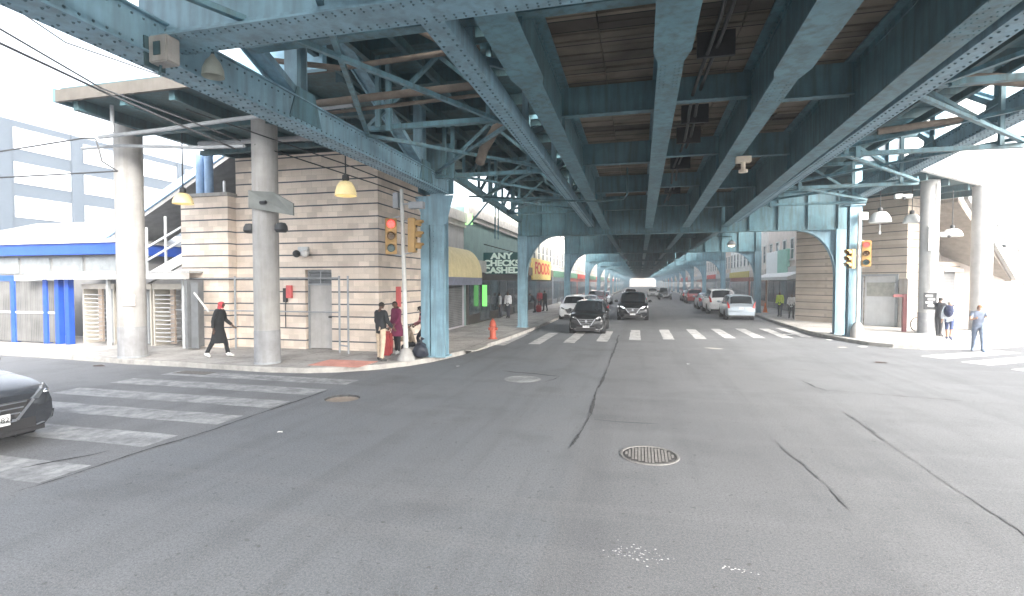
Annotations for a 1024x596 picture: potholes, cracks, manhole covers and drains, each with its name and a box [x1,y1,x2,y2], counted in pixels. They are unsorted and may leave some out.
manhole cover [620,445,680,466]
